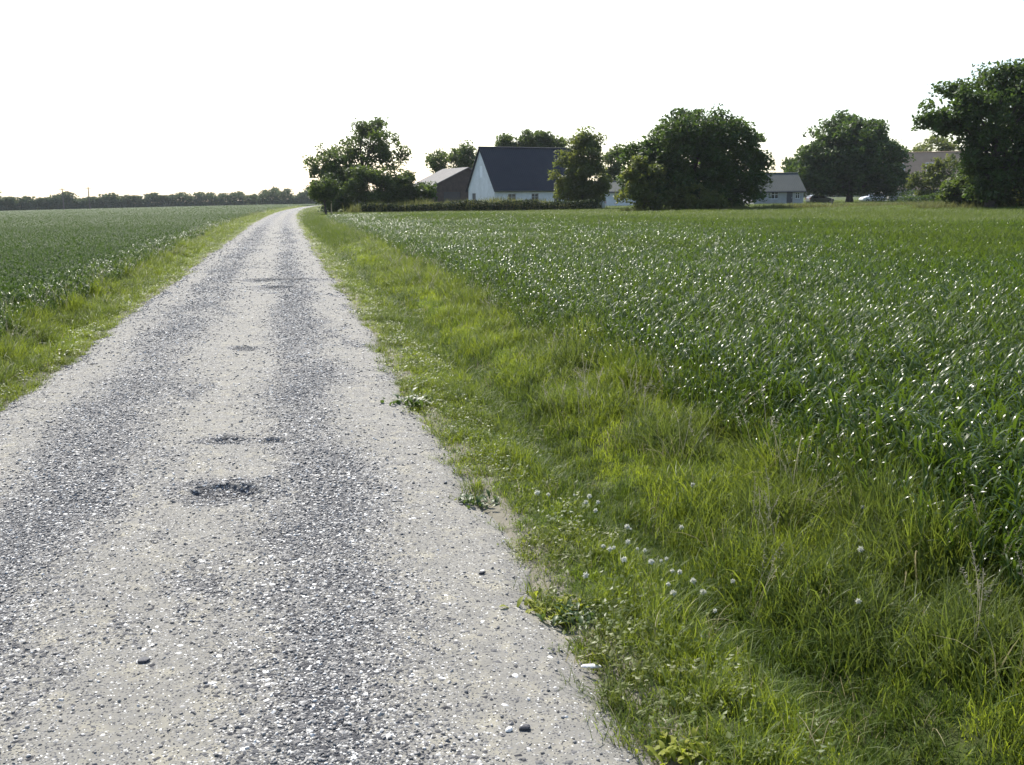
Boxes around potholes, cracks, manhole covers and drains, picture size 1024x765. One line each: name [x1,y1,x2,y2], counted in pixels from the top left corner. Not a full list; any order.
pothole [207,435,247,444]
pothole [180,482,271,502]
